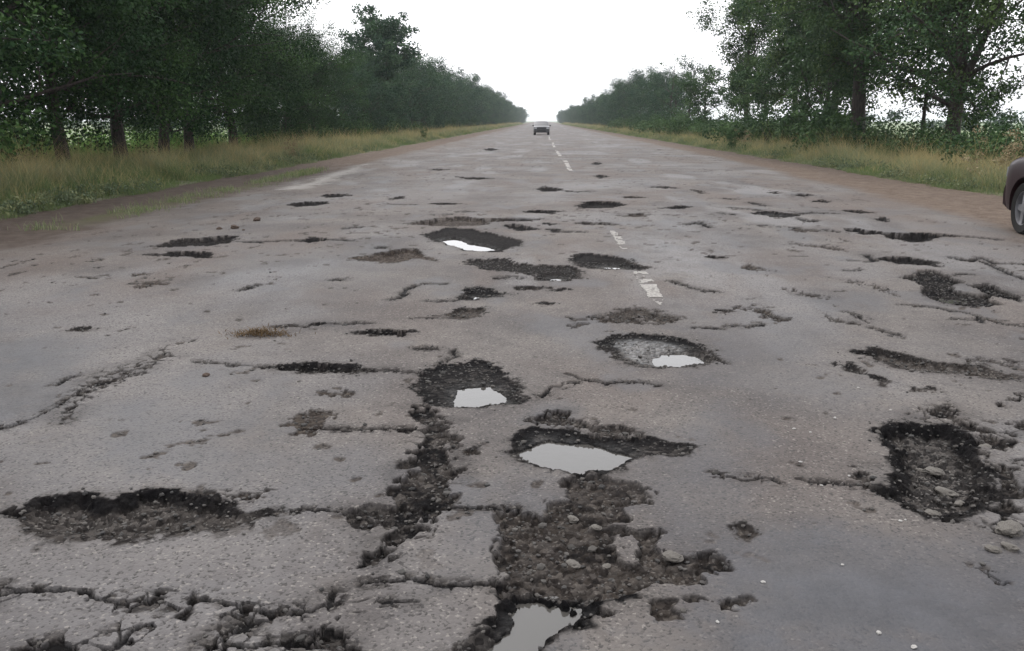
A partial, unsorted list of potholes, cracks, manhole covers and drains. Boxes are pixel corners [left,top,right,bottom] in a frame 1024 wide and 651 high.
pothole [500,426,699,483]
crack [706,470,881,496]
pothole [461,257,587,282]
crack [447,502,524,518]
pothole [404,359,533,410]
pothole [347,248,439,264]
crack [298,424,415,434]
pothole [869,419,1010,524]
pothole [419,227,524,252]
crack [274,505,391,525]
pothole [592,332,725,370]
